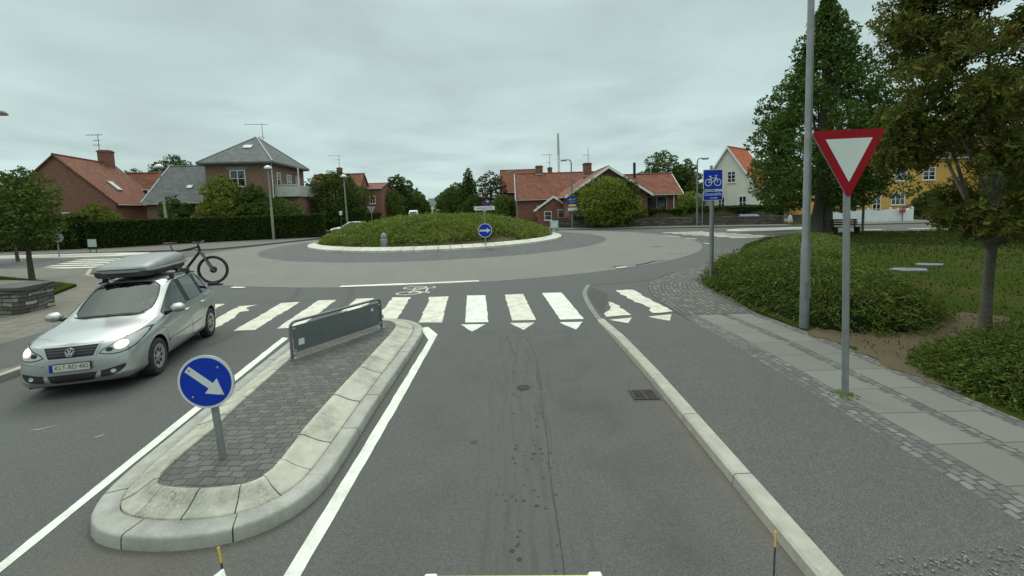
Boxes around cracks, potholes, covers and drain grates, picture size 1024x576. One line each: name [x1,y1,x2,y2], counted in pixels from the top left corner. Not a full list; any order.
crack [526,338,565,575]
drain grate [629,389,659,400]
